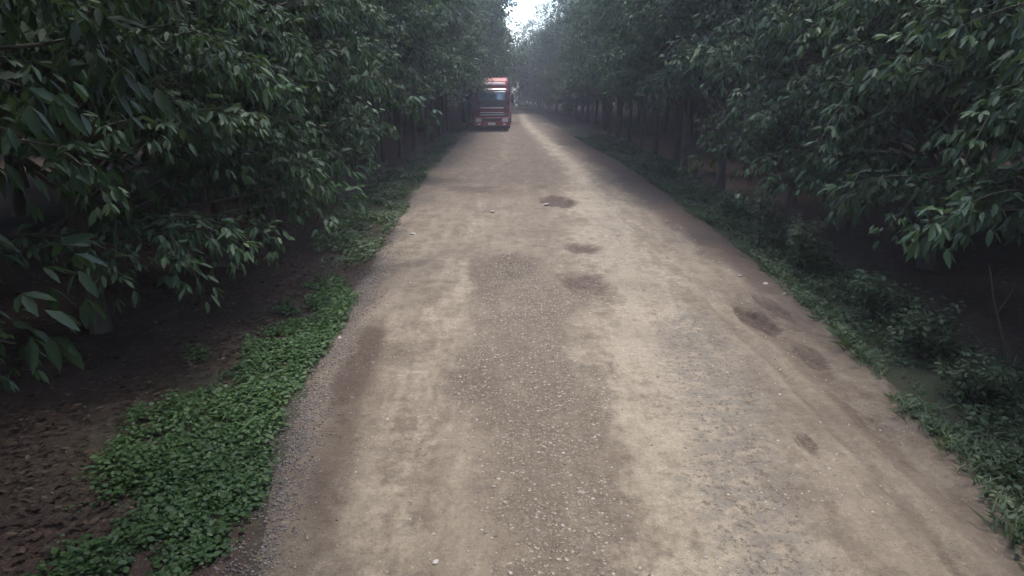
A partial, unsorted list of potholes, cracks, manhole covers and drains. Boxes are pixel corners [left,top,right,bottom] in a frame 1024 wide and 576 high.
pothole [793,431,824,460]
pothole [744,290,801,327]
pothole [535,193,579,210]
pothole [727,303,791,342]
pothole [552,270,619,300]
pothole [783,338,843,376]
pothole [558,242,609,255]
